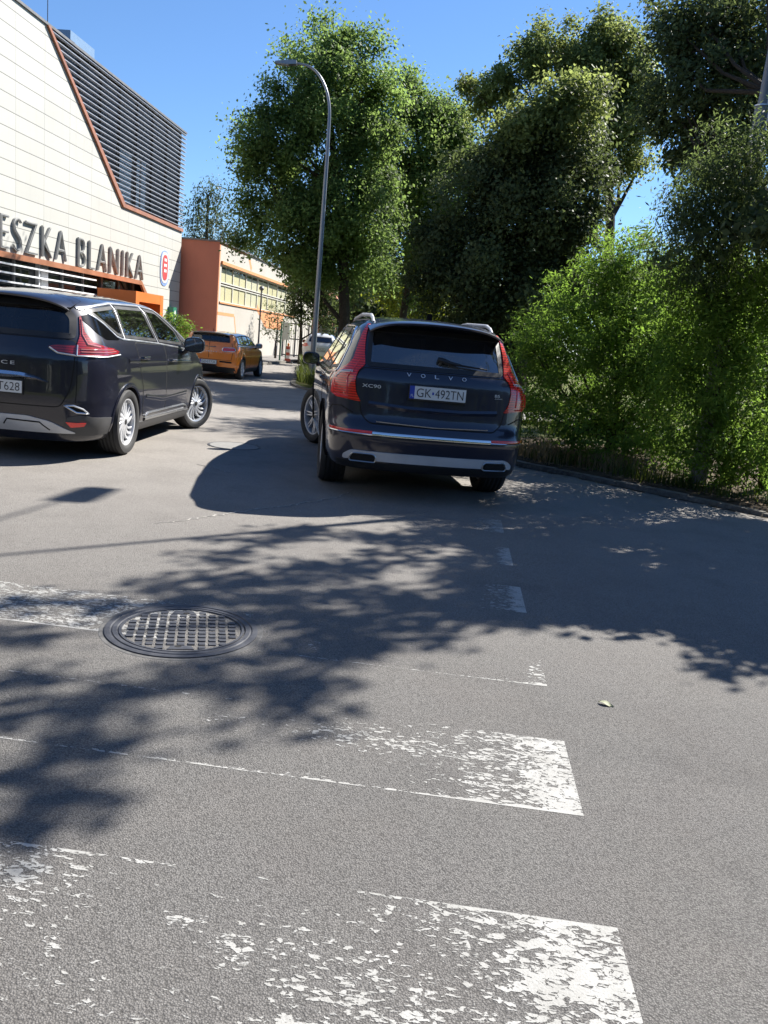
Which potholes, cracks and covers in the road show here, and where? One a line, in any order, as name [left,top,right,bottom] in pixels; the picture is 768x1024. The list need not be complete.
manhole cover [98,604,263,661]
manhole cover [207,442,261,450]
